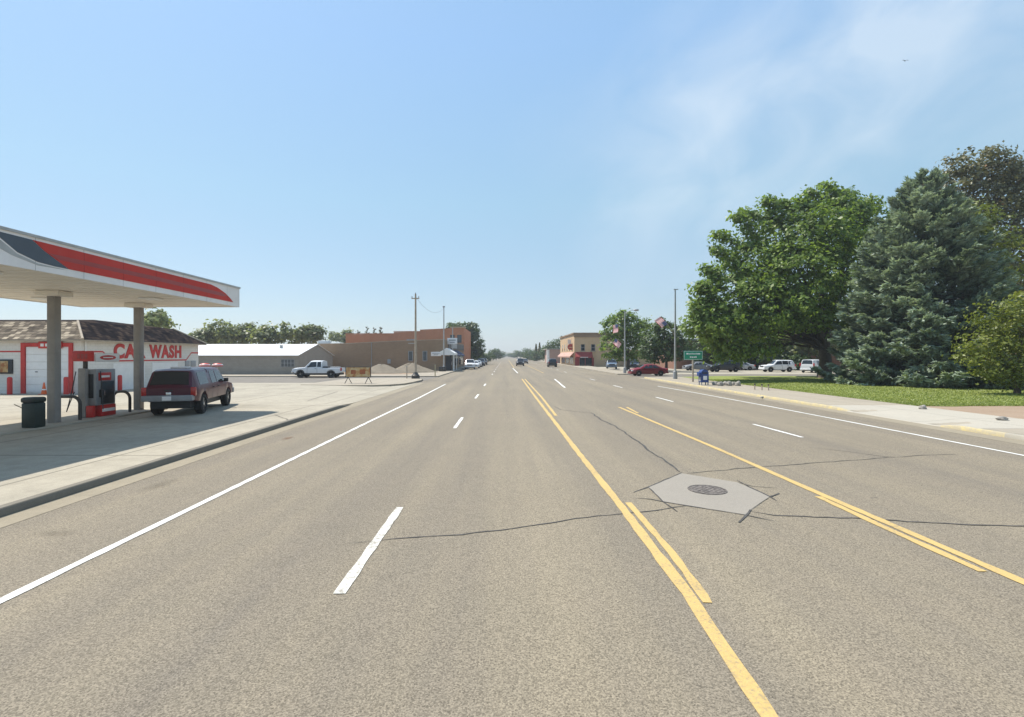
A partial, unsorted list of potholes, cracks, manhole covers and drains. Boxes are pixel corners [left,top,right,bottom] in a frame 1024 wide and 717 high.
crack [383,448,1024,540]
manhole cover [688,485,727,495]
